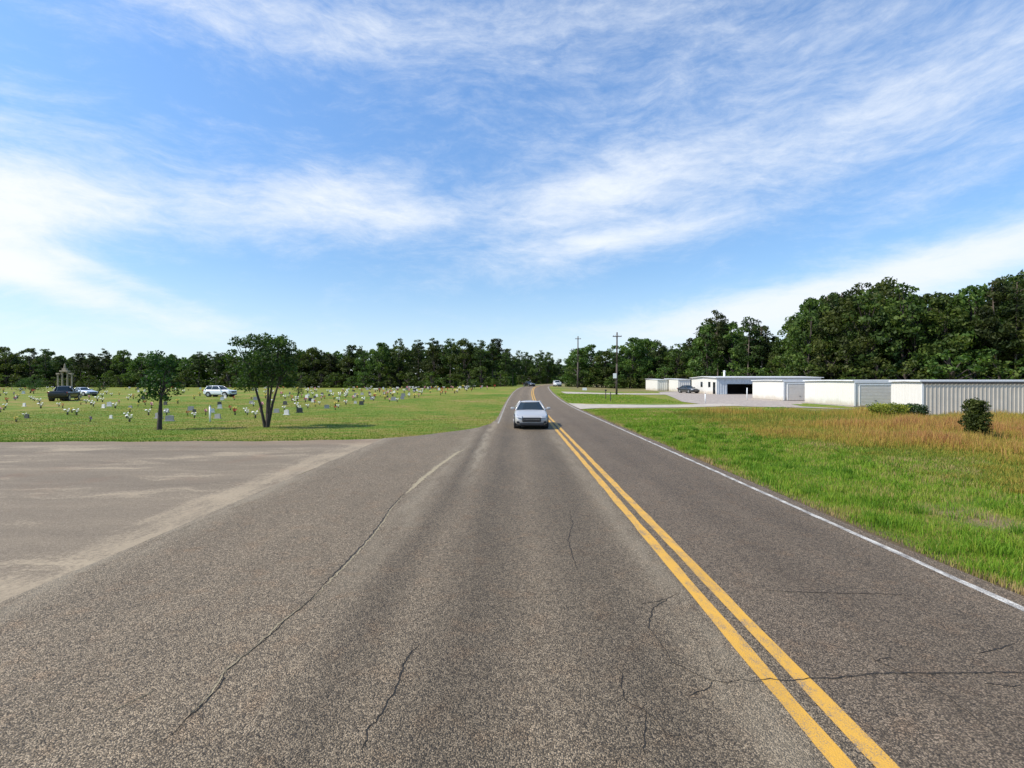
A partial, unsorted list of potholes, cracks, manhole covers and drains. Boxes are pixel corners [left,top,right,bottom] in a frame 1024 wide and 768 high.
crack [743,657,1024,731]
crack [362,646,418,748]
crack [619,593,737,750]
